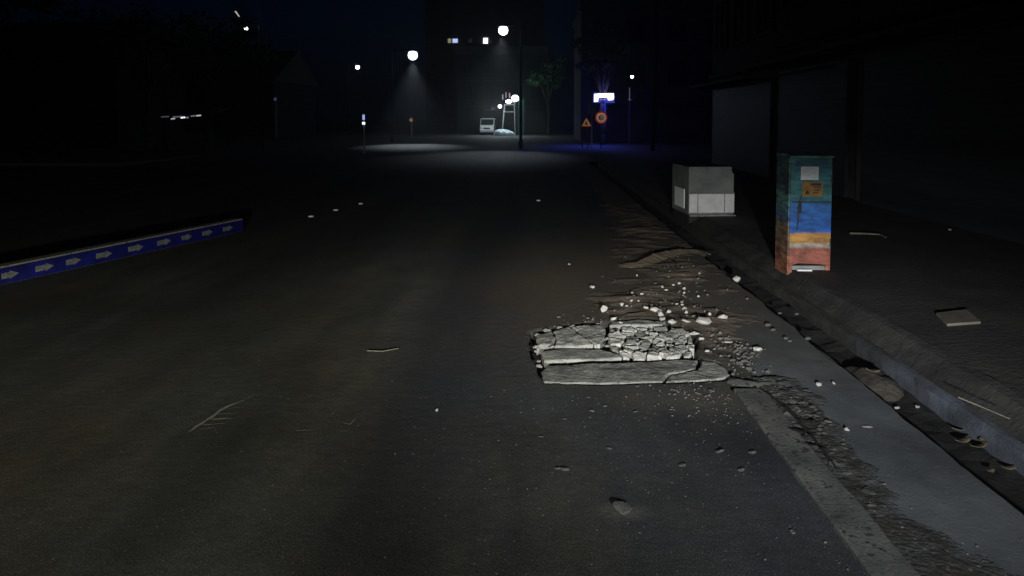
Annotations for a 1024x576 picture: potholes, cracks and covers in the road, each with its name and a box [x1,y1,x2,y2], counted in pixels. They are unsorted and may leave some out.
pothole [527,318,734,389]
crack [727,376,1023,576]
